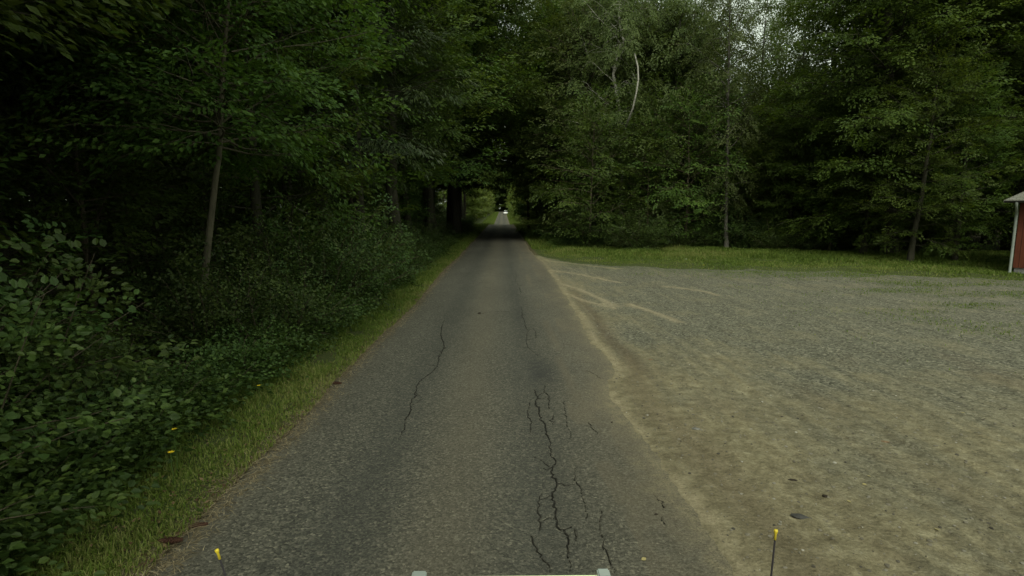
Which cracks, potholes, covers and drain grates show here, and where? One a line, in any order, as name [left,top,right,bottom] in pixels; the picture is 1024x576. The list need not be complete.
crack [399,320,446,438]
crack [526,386,616,573]
